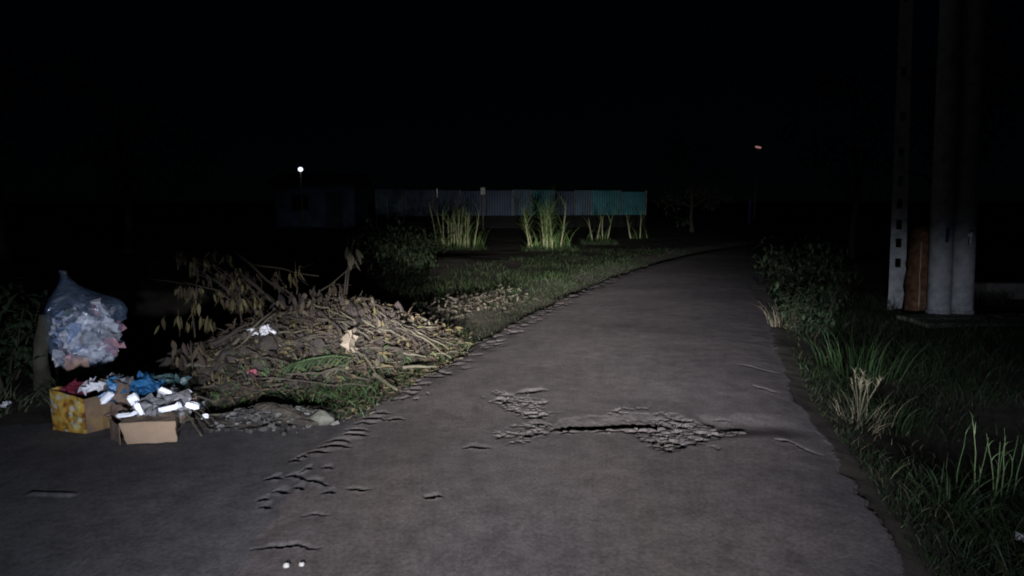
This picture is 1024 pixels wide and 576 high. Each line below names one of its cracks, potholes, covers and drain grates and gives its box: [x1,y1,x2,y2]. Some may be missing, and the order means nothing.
pothole [550,406,745,454]
crack [250,540,327,550]
crack [736,363,785,394]
crack [732,438,827,457]
crack [256,456,339,517]
